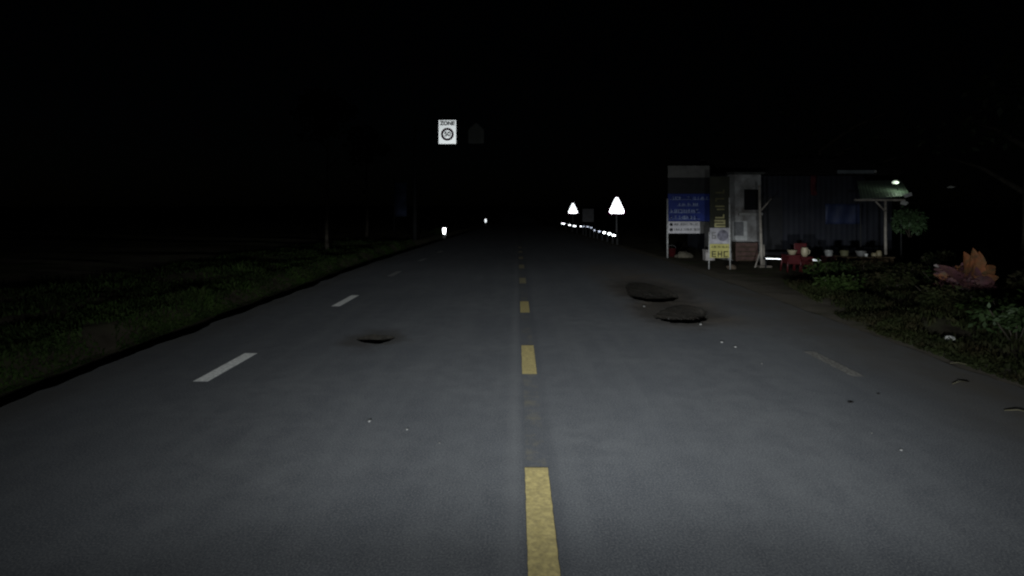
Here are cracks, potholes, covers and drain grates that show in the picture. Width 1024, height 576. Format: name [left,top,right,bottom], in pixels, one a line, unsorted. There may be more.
pothole [625,282,678,302]
pothole [653,305,708,324]
pothole [357,334,395,344]
